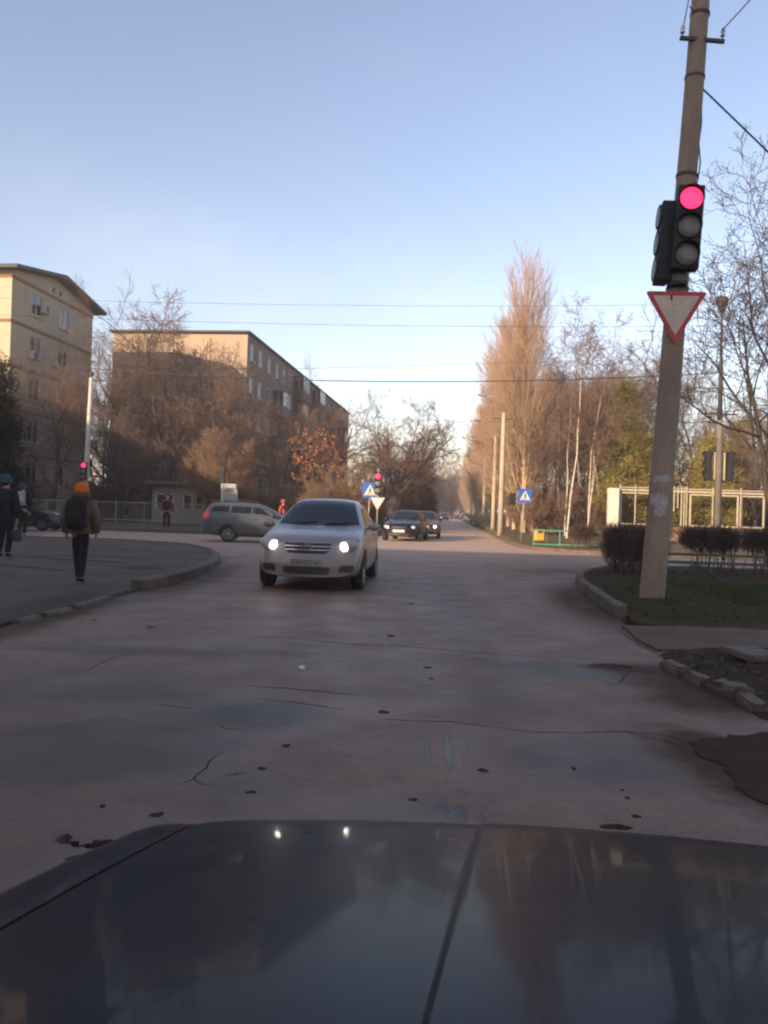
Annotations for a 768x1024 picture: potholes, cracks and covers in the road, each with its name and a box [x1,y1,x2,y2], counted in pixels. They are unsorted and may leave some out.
crack [178,752,242,786]
crack [241,685,352,710]
pothole [52,834,113,849]
crack [385,716,694,751]
